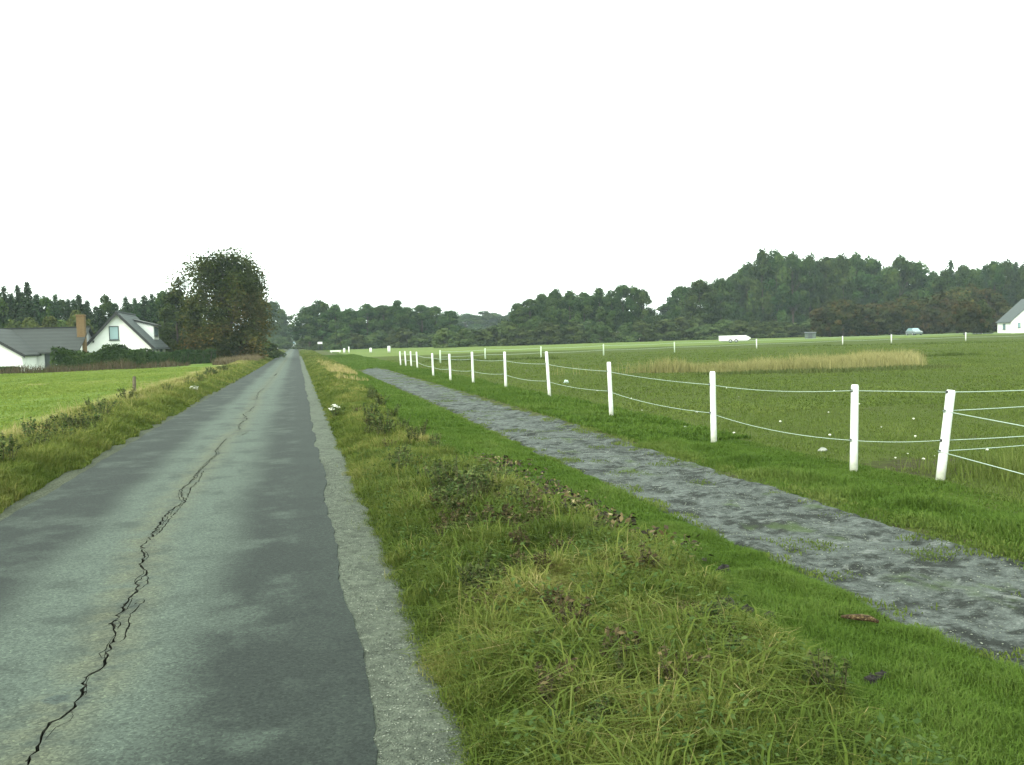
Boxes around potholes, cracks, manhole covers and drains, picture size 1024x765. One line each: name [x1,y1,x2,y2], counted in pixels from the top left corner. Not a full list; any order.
crack [25,441,224,765]
